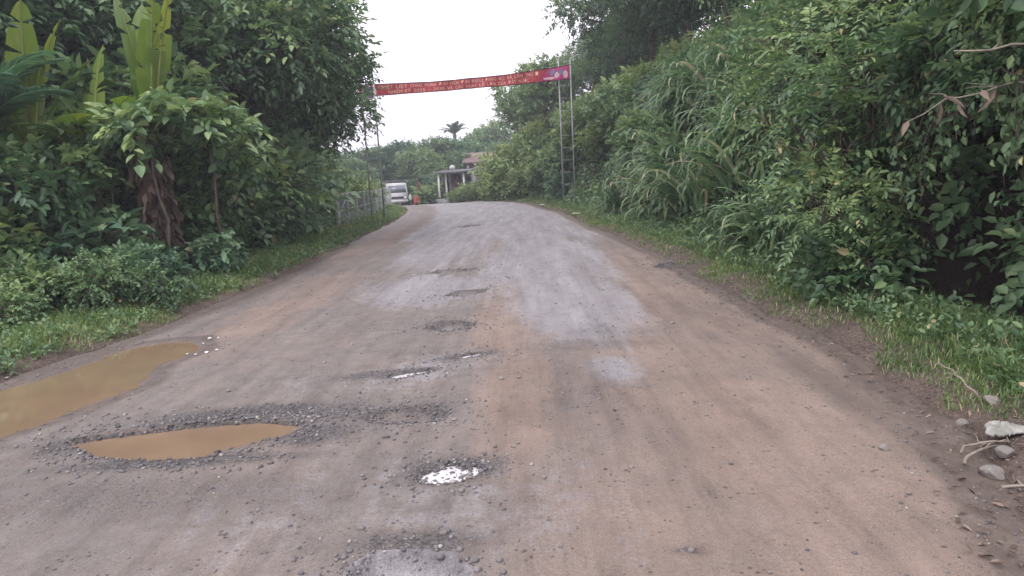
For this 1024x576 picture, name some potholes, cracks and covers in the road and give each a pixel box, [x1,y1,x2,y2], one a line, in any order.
pothole [420,264,494,278]
pothole [0,333,234,439]
pothole [292,388,500,446]
pothole [408,342,522,370]
pothole [426,286,508,301]
pothole [397,315,498,337]
pothole [2,401,374,488]
pothole [342,358,477,391]
